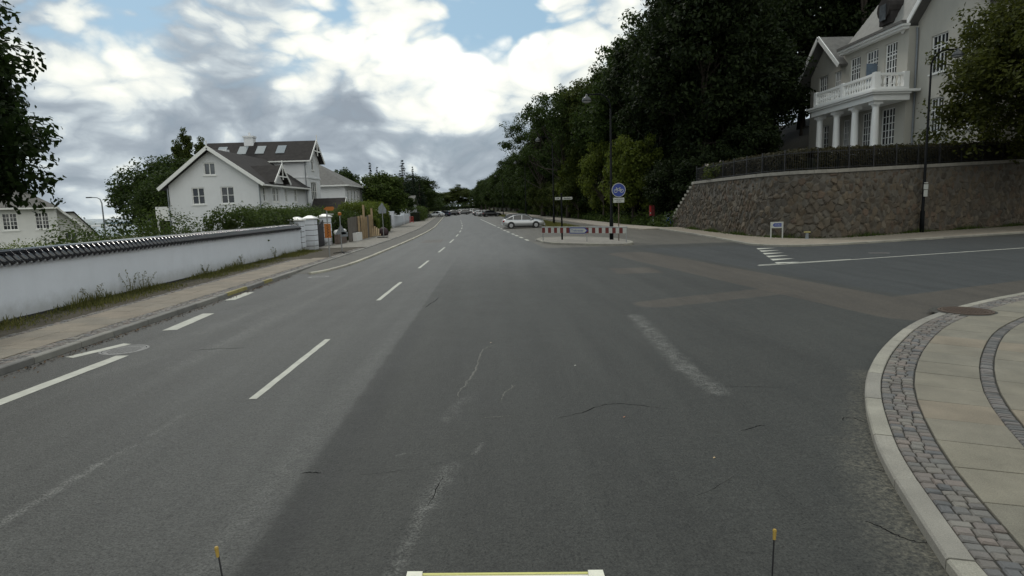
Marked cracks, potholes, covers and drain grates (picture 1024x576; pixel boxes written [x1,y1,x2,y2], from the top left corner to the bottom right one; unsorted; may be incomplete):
manhole cover [98,345,150,355]
crack [457,345,514,418]
manhole cover [929,306,998,317]
crack [860,519,927,543]
